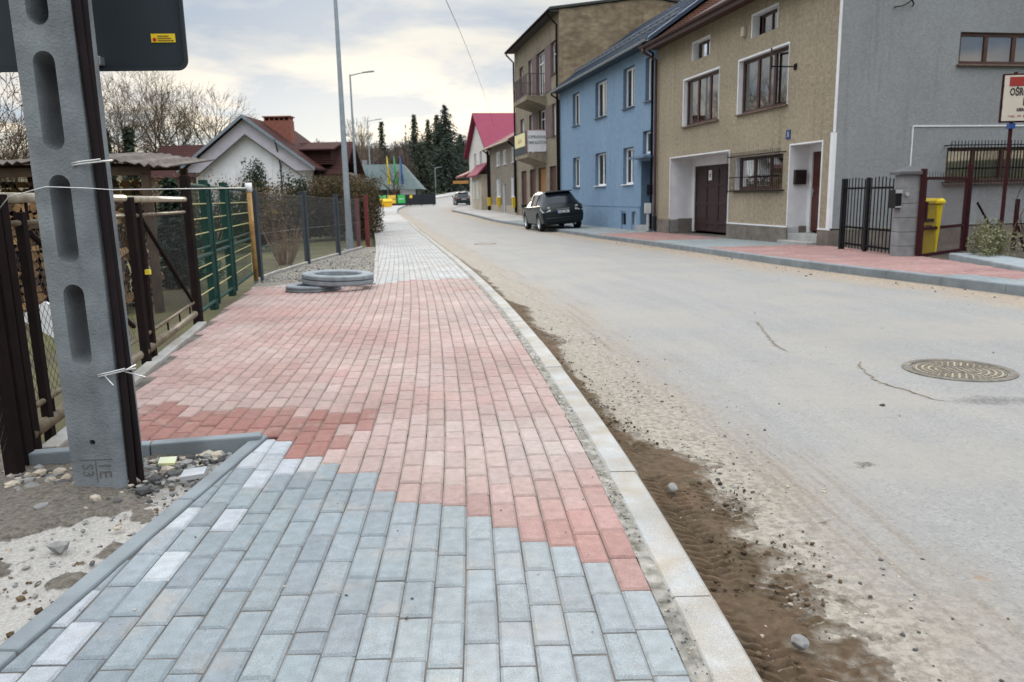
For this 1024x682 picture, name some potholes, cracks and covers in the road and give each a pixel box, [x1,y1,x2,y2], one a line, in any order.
manhole cover [902,358,1019,382]
crack [752,321,789,352]
crack [856,362,943,401]
